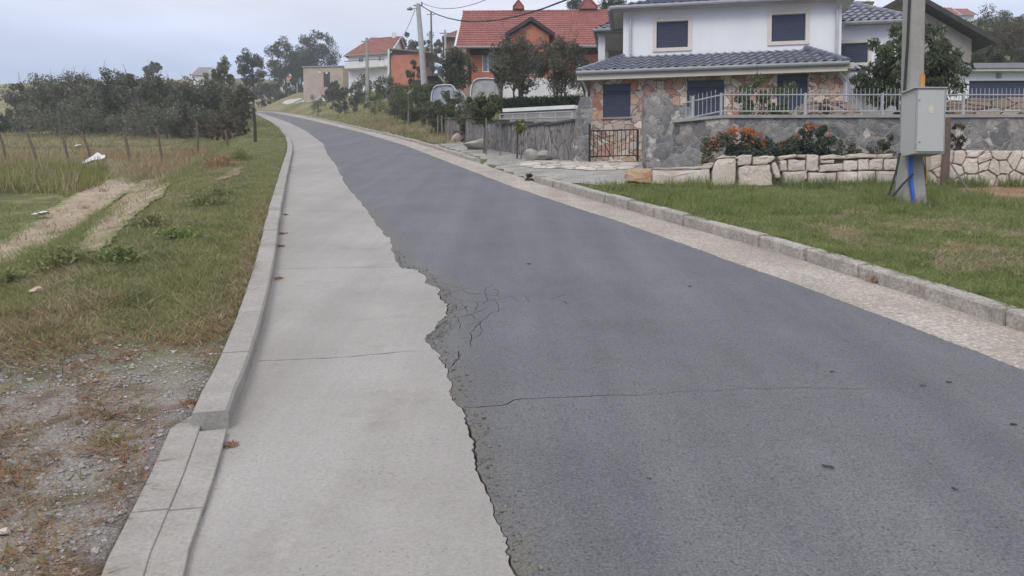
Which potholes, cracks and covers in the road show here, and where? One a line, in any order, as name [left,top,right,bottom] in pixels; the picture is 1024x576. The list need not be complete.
crack [425,277,876,568]
